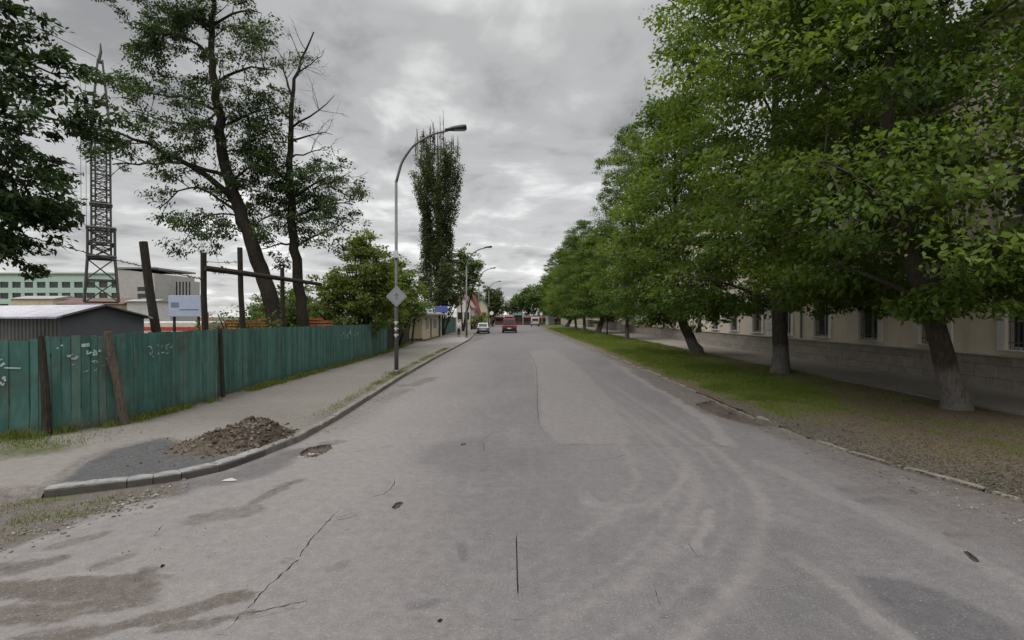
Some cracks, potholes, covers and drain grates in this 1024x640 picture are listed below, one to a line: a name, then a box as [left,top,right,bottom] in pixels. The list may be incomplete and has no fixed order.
pothole [428,613,452,629]
crack [214,477,400,635]
pothole [295,443,337,459]
pothole [957,548,987,566]
pothole [694,400,776,427]
pothole [386,500,408,512]
